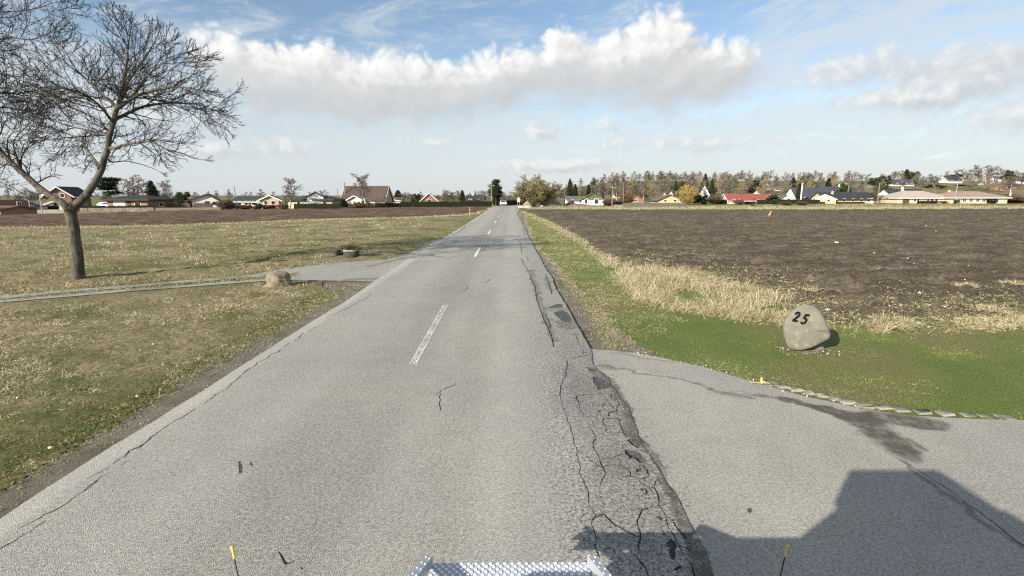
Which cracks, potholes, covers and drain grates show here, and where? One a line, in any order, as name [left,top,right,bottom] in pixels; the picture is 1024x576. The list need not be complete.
crack [0,295,370,549]
crack [519,229,587,367]
crack [559,356,695,576]
